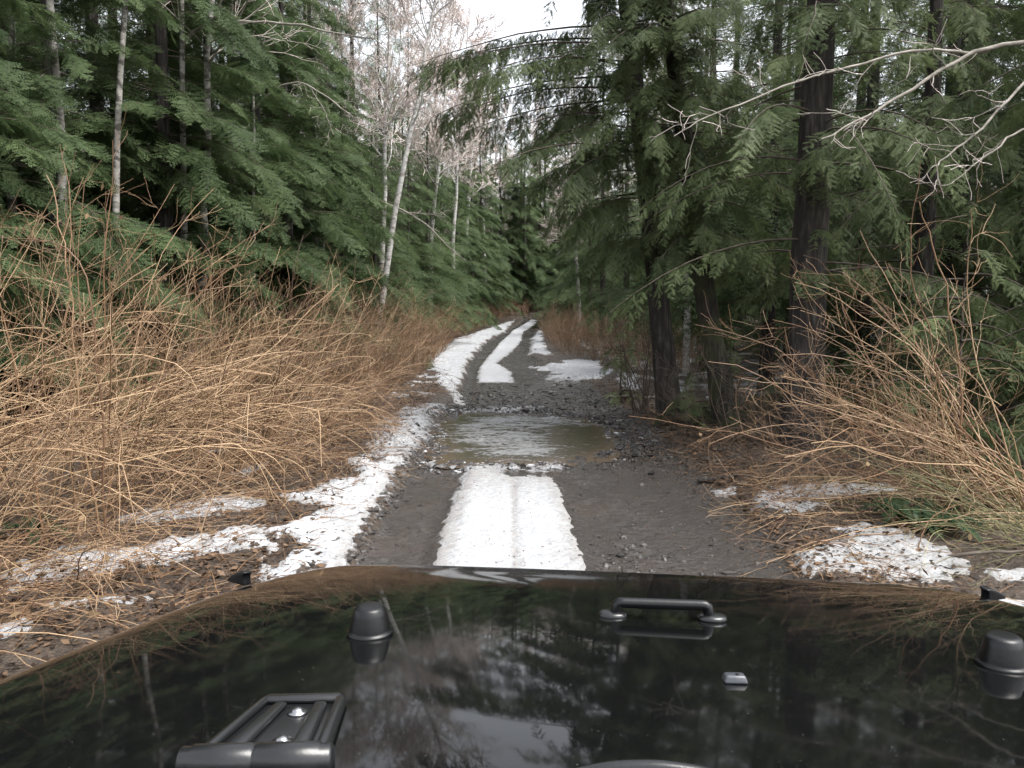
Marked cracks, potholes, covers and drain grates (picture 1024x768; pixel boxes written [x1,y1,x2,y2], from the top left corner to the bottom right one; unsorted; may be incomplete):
pothole [395,405,662,475]
